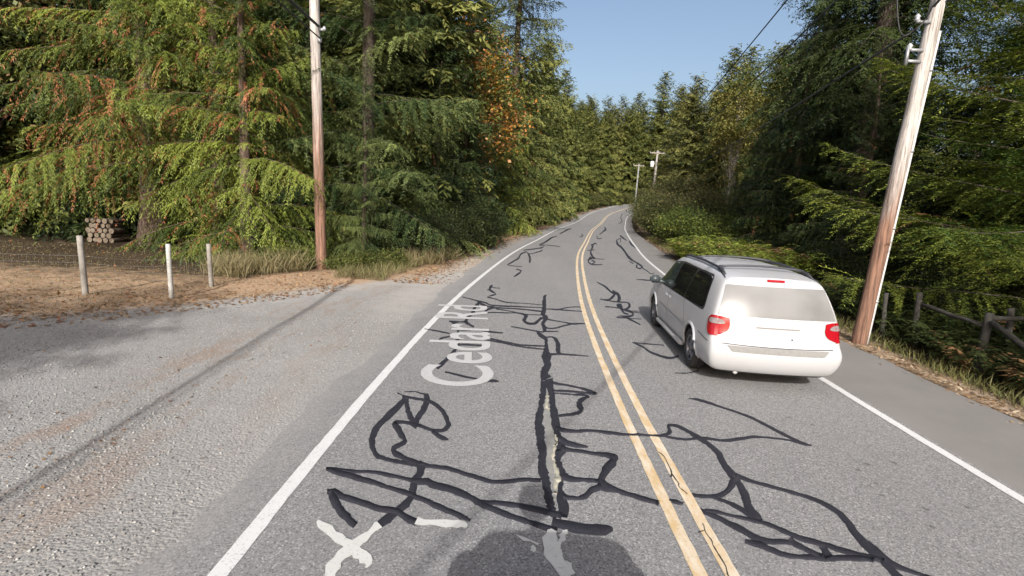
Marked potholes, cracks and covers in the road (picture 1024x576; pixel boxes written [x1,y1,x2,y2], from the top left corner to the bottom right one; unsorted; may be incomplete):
crack [659,452,687,494]
crack [698,523,729,576]
